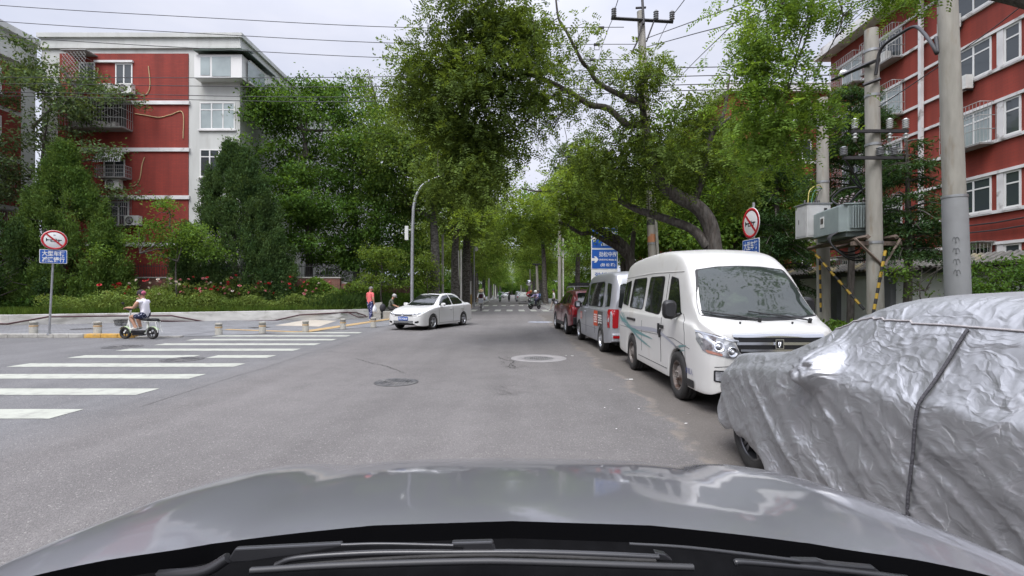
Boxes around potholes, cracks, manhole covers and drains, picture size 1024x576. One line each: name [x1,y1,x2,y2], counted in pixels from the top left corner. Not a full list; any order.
manhole cover [374,378,418,386]
manhole cover [511,354,567,362]
